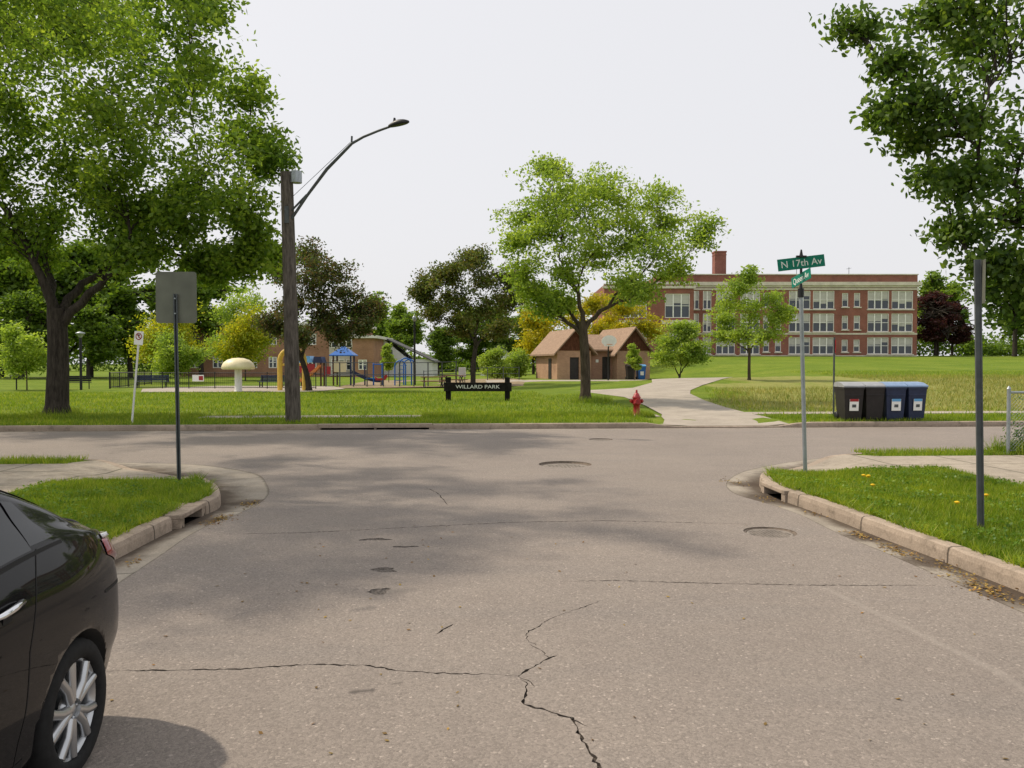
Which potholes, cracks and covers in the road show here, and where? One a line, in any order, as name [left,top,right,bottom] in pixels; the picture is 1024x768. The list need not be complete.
drain grate [163,502,206,530]
crack [114,601,602,768]
manhole cover [743,527,797,538]
drain grate [760,481,802,503]
